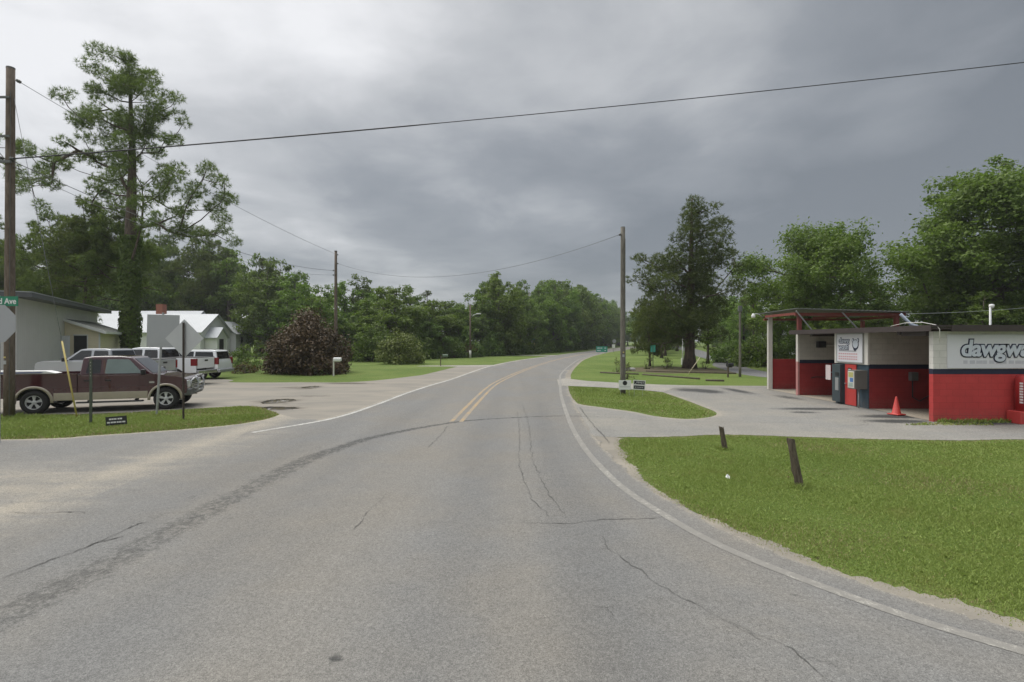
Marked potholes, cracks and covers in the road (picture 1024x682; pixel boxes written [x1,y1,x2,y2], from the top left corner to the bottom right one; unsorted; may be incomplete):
crack [518,413,847,682]
crack [8,521,151,576]
